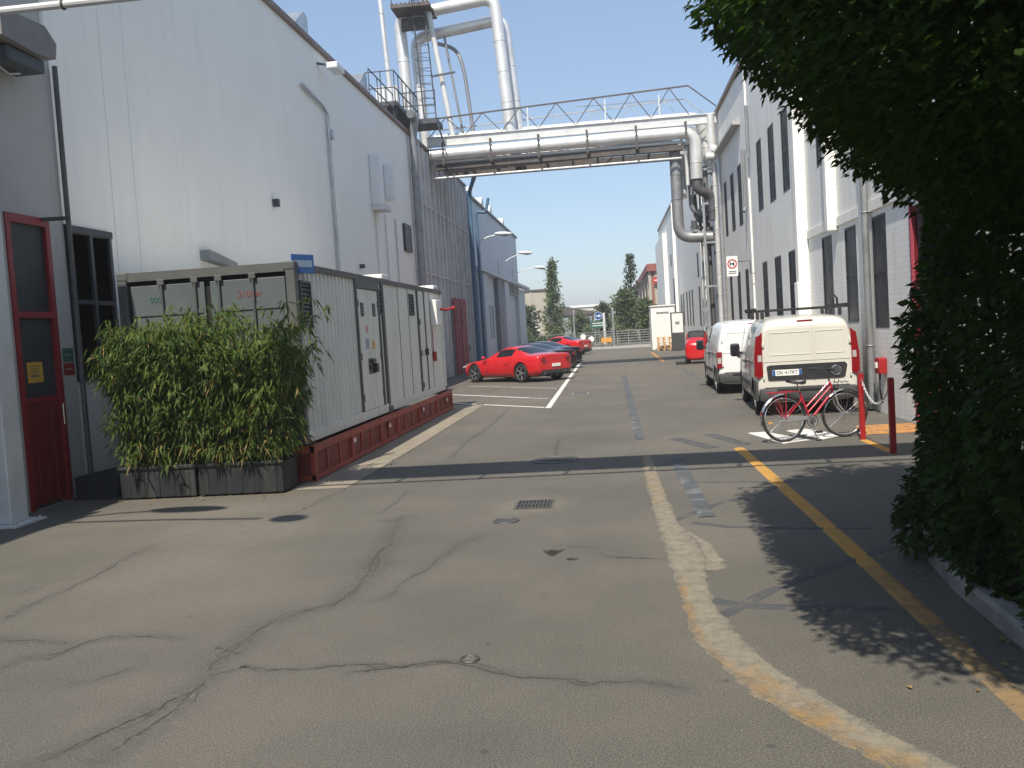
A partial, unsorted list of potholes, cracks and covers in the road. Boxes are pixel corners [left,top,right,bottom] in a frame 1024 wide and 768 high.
pothole [540,547,566,557]
utility cover [459,654,480,664]
crack [0,635,181,679]
crack [37,516,682,762]
drain grate [512,499,556,510]
manhole cover [532,456,579,464]
